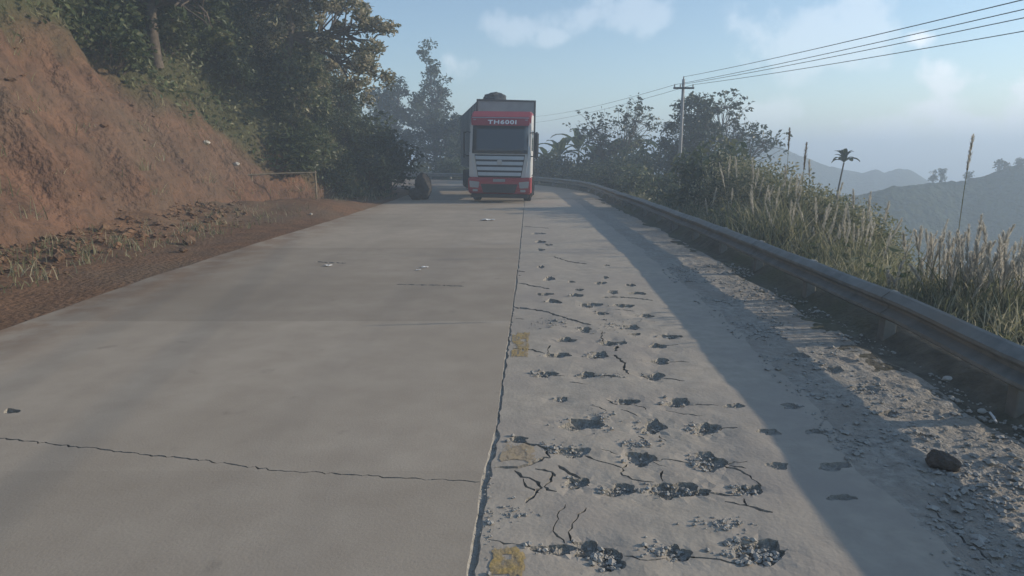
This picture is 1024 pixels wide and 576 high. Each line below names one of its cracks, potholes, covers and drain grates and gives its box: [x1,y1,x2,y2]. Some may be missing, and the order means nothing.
pothole [634,418,668,435]
pothole [571,539,611,560]
pothole [589,547,626,572]
pothole [619,452,658,467]
crack [494,442,689,545]
pothole [595,483,636,497]
crack [514,296,653,384]
pothole [722,536,786,567]
pothole [635,482,698,500]
pothole [547,418,605,431]
pothole [685,451,728,473]
